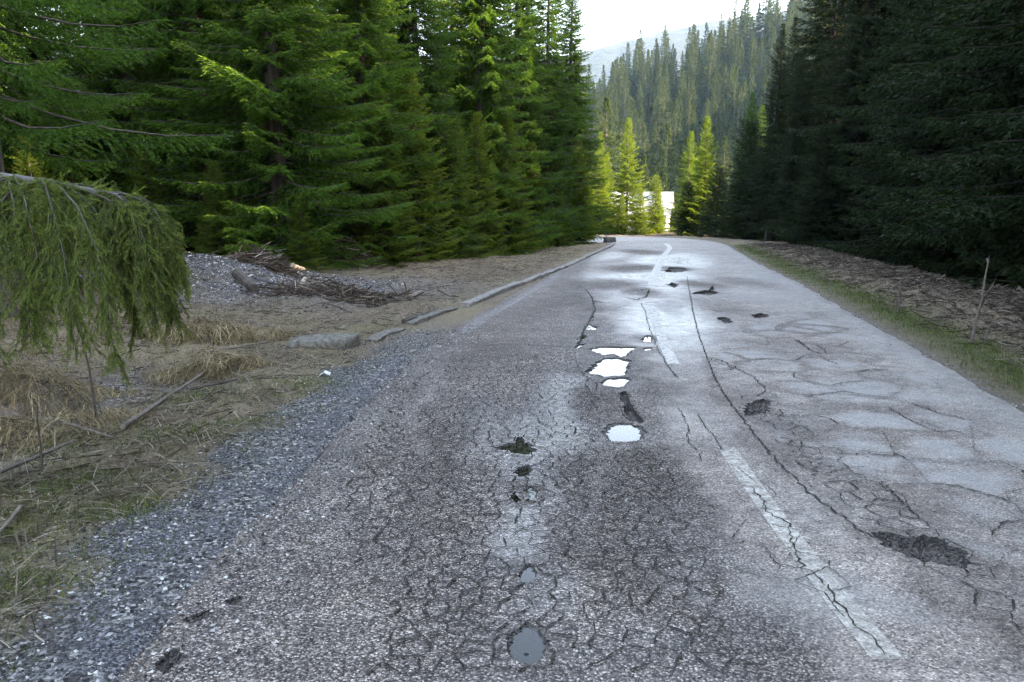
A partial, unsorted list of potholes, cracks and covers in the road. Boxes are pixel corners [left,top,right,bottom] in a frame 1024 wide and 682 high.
crack [365,352,762,675]
pothole [585,346,640,358]
pothole [713,316,736,324]
pothole [593,376,636,389]
pothole [617,390,645,426]
pothole [488,435,544,457]
pothole [494,616,563,672]
pothole [506,462,540,480]
pothole [581,357,636,378]
pothole [502,488,530,506]
crack [345,364,444,563]
